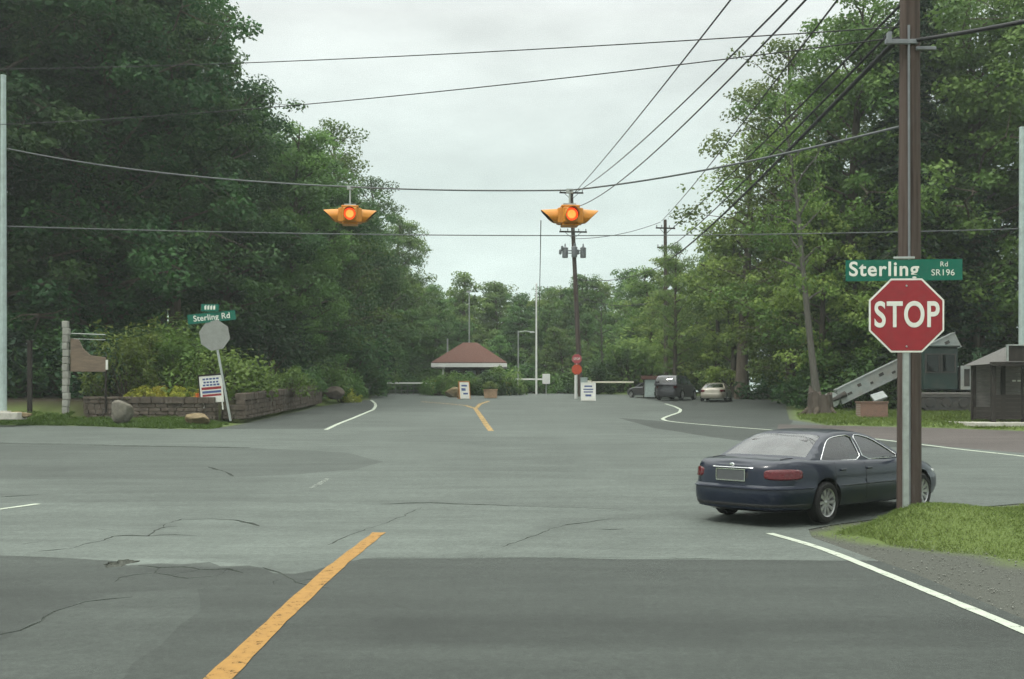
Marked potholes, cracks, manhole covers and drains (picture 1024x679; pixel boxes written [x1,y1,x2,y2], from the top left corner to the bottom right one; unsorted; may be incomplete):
pothole [103,559,140,568]
crack [31,519,259,551]
crack [0,565,243,635]
crack [392,519,711,559]
